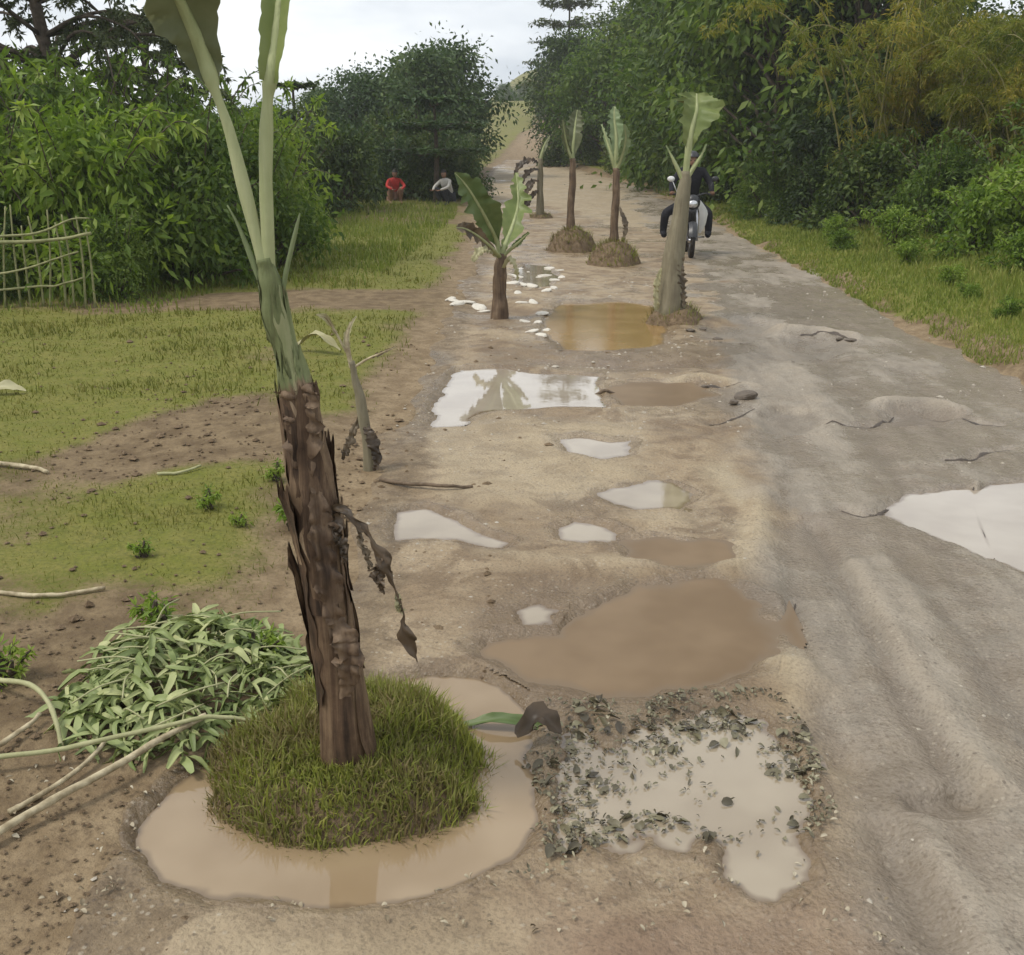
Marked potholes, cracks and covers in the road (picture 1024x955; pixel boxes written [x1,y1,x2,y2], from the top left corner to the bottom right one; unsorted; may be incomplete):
crack [824,417,894,428]
pothole [544,517,635,543]
crack [841,509,889,517]
pothole [382,501,521,549]
pothole [605,530,750,571]
pothole [587,479,705,512]
pothole [542,698,834,911]
pothole [419,363,612,427]
pothole [874,479,1024,573]
pothole [544,431,643,460]
pothole [526,296,680,352]
pothole [599,373,722,407]
